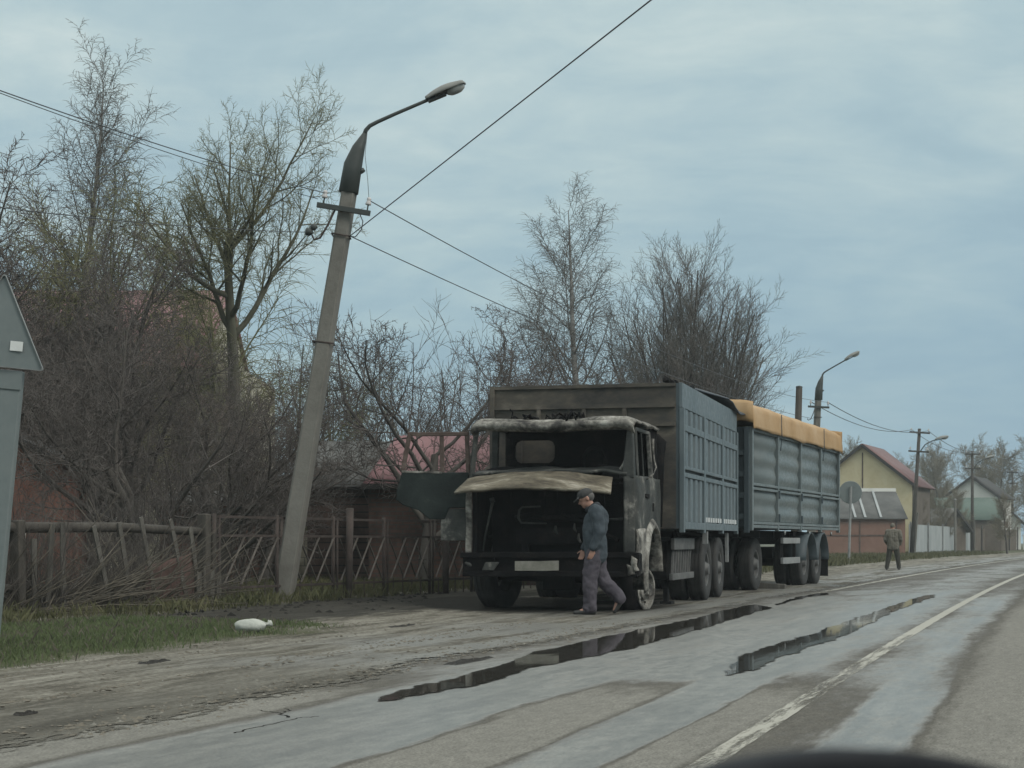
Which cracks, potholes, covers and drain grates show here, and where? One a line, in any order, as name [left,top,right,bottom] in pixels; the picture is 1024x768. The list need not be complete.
crack [234,708,318,733]
